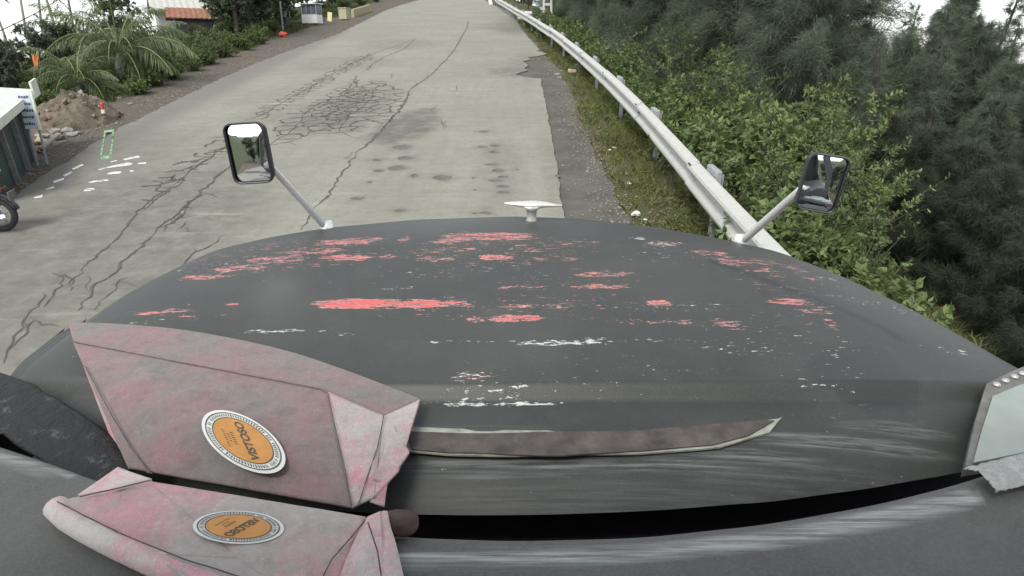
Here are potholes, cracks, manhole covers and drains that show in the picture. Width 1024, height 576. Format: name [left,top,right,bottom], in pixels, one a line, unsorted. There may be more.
crack [3,136,230,363]
crack [247,22,471,229]
